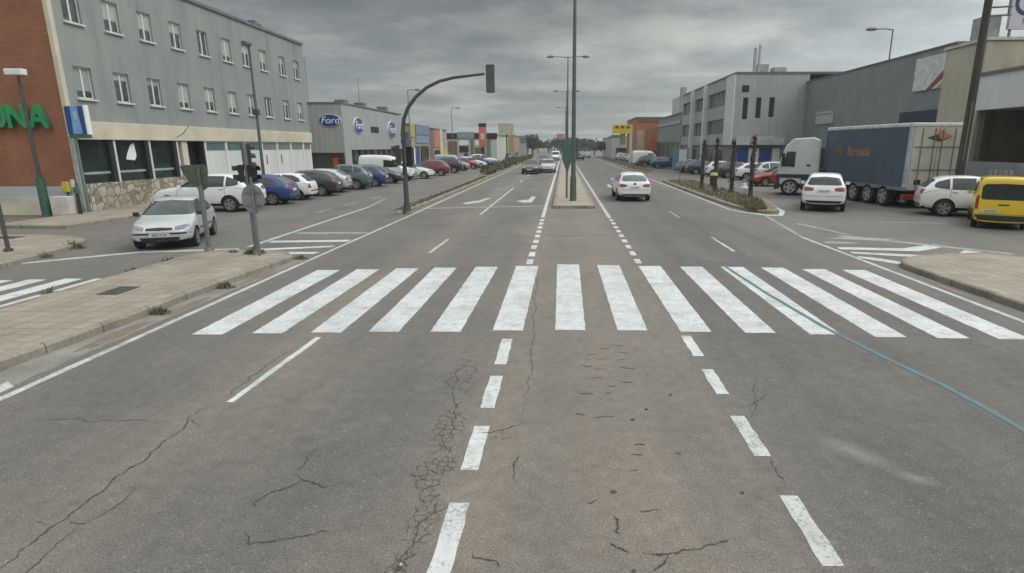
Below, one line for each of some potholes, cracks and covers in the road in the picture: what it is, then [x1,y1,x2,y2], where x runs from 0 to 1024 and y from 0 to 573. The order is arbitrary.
crack [0,409,201,573]
crack [384,359,478,573]
crack [649,538,738,571]
crack [482,424,520,480]
crack [253,449,339,509]
crack [244,530,326,544]
manhole cover [96,286,141,295]
